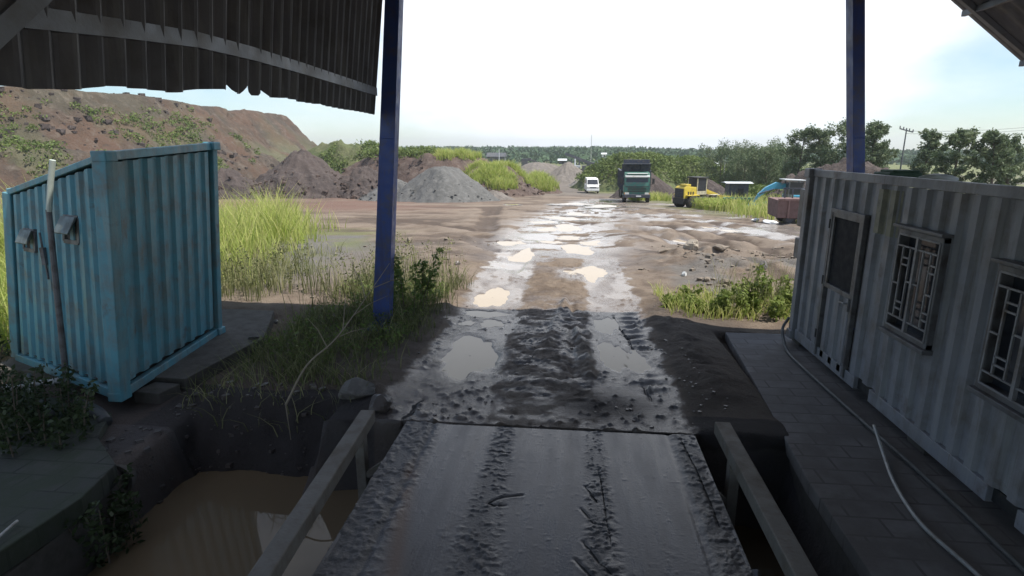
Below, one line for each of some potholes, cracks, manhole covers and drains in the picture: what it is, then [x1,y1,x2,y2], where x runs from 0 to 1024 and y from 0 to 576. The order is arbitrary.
pothole [558,266,610,284]
pothole [469,285,512,308]
pothole [498,248,535,277]
pothole [624,350,657,375]
pothole [560,244,601,257]
pothole [437,333,506,383]
pothole [595,340,630,375]
